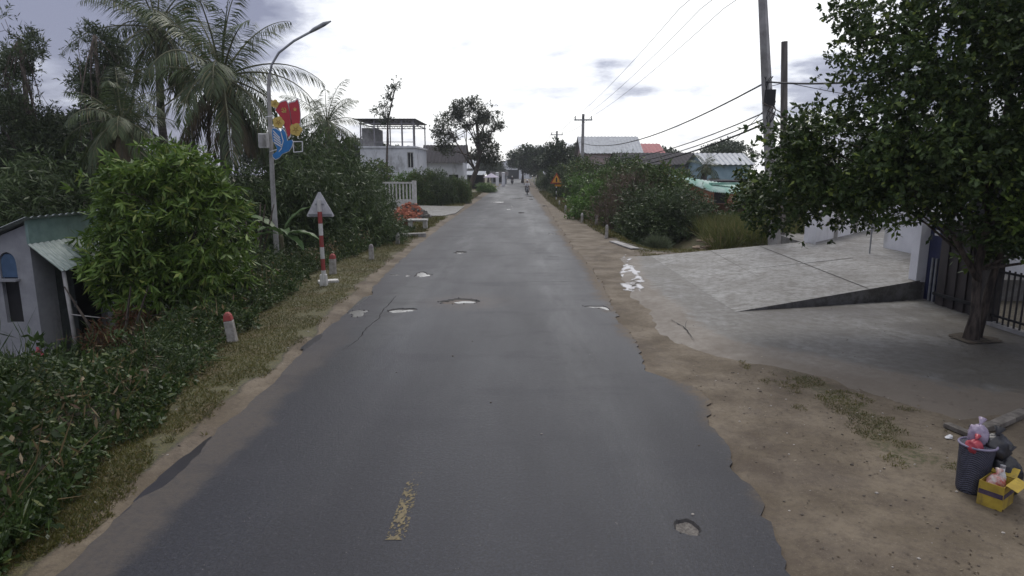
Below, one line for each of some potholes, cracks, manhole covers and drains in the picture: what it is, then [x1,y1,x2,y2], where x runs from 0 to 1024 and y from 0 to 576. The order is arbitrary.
pothole [673,519,702,536]
